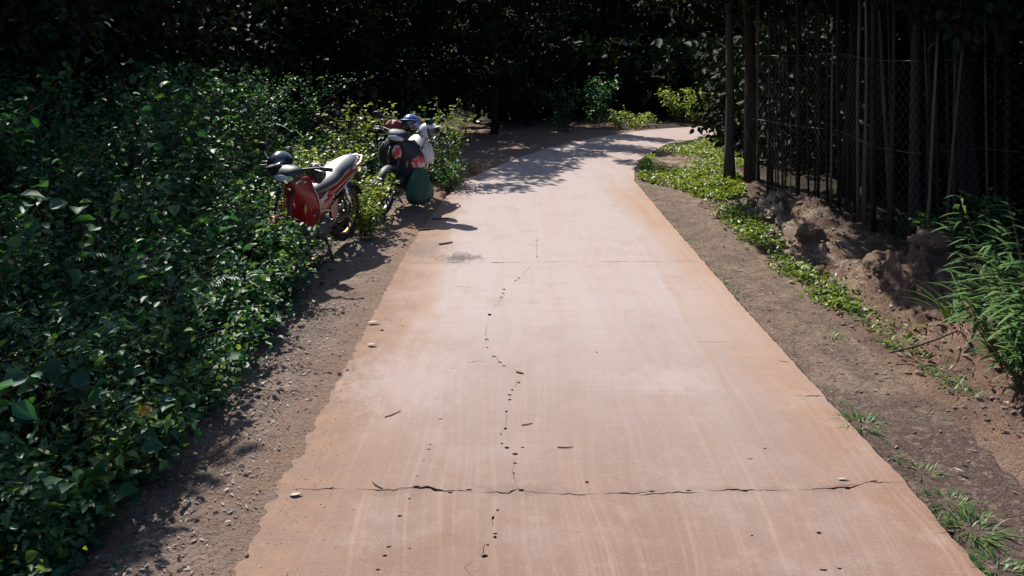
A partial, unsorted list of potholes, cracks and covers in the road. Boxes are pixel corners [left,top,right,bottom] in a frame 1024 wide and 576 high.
crack [286,237,904,573]
